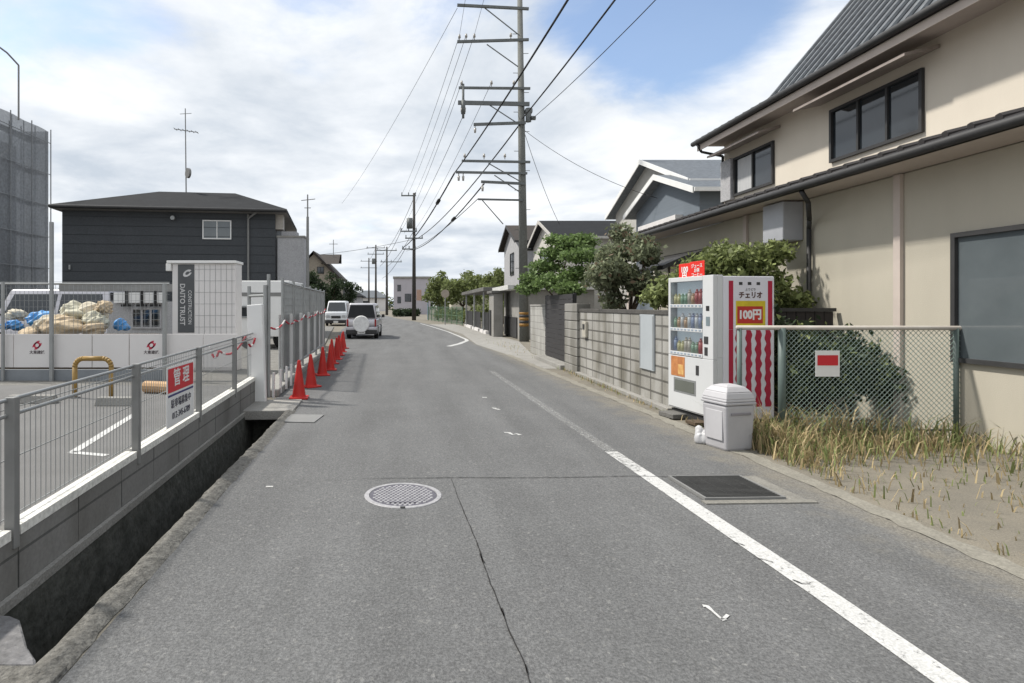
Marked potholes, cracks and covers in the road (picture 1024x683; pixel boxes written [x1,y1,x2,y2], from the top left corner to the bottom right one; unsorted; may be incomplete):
drain grate [668,475,818,505]
crack [300,476,668,683]
manhole cover [364,483,442,509]
